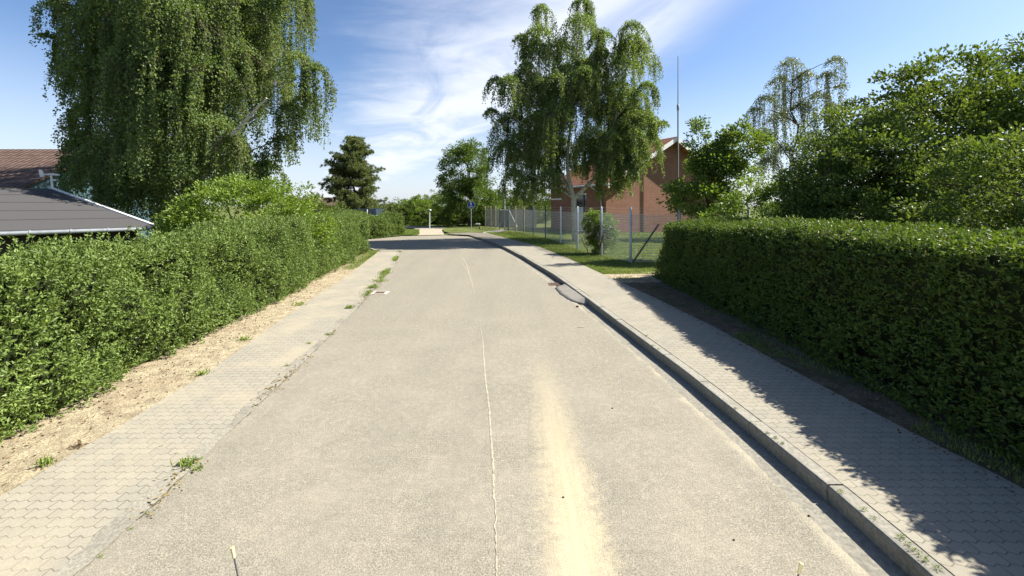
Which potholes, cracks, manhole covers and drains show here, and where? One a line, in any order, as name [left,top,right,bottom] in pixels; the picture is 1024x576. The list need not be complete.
crack [479,323,498,576]
